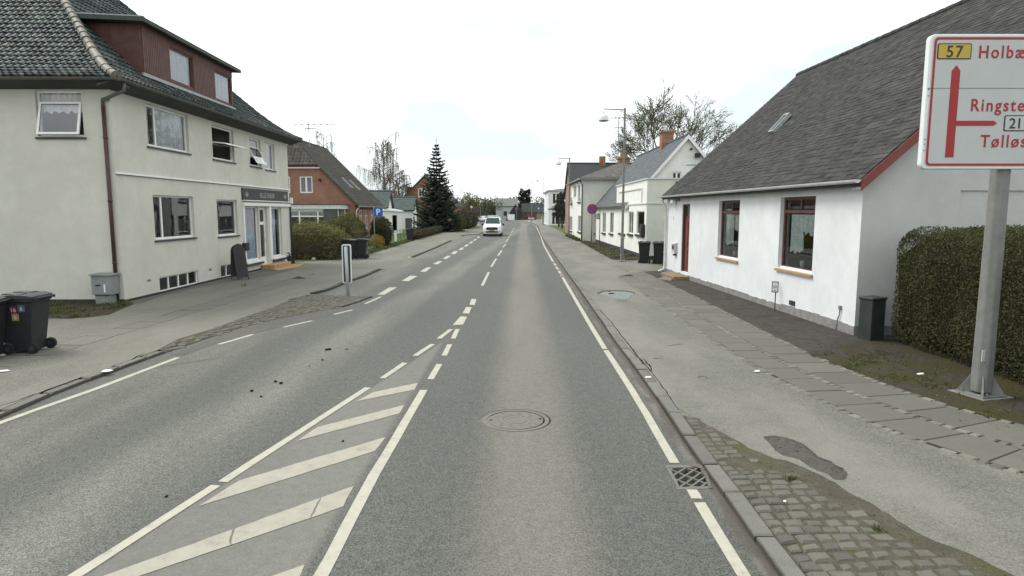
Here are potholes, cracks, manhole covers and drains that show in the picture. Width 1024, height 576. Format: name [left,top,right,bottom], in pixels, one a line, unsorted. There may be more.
drain grate [665,464,712,490]
manhole cover [481,409,551,432]
